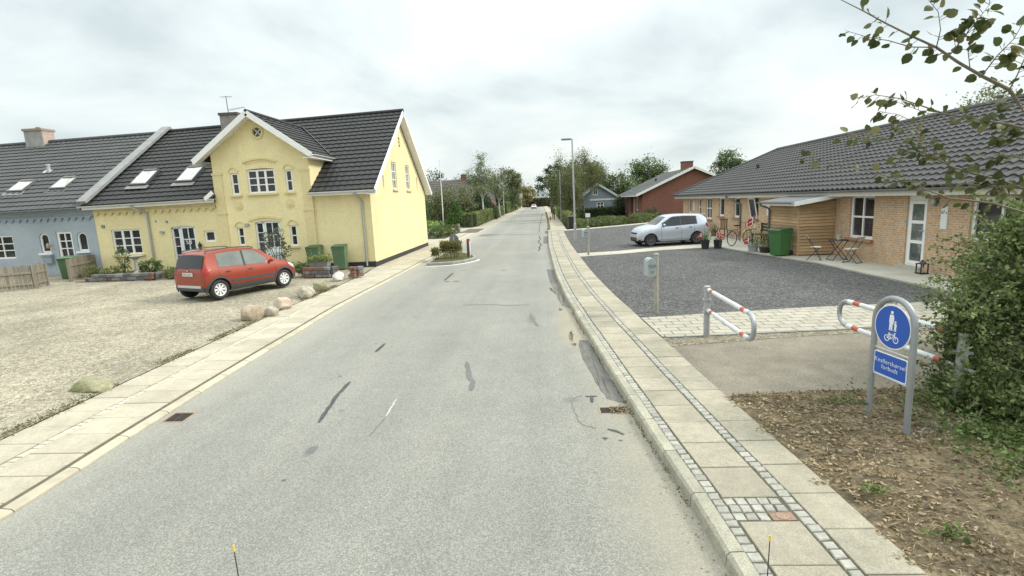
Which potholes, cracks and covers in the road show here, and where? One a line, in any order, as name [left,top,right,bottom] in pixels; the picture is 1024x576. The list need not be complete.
drain grate [598,406,629,414]
drain grate [160,412,197,423]
